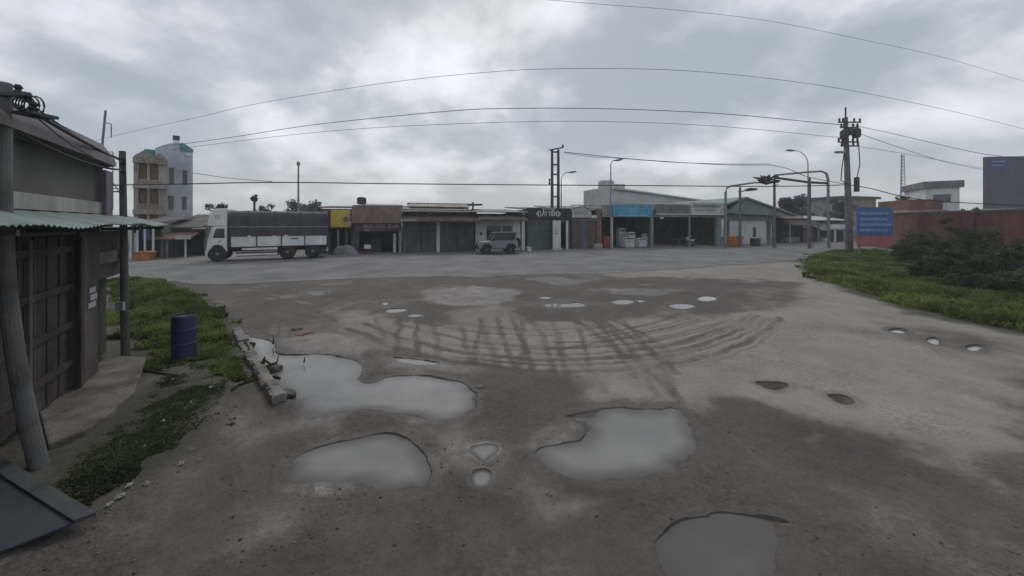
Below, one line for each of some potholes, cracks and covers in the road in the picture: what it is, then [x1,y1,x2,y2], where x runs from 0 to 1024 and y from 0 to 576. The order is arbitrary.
pothole [655,511,791,576]
pothole [243,331,478,420]
pothole [534,406,706,484]
pothole [283,432,432,492]
pothole [827,393,855,405]
pothole [470,468,492,487]
pothole [470,443,499,462]
pothole [755,381,789,390]
